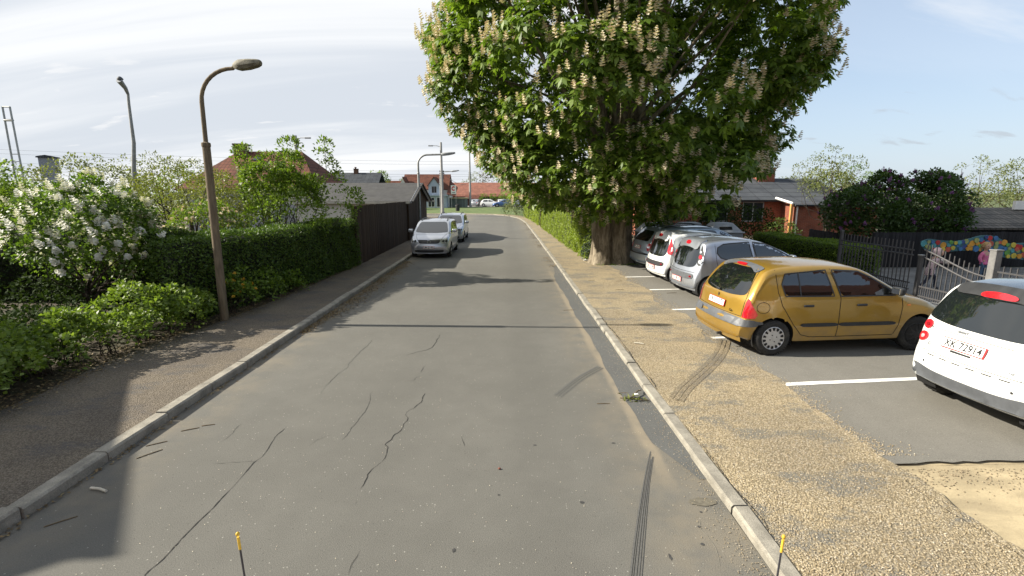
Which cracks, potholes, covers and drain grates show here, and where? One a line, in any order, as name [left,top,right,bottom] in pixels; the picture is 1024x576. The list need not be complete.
crack [144,428,285,576]
crack [363,340,437,485]
